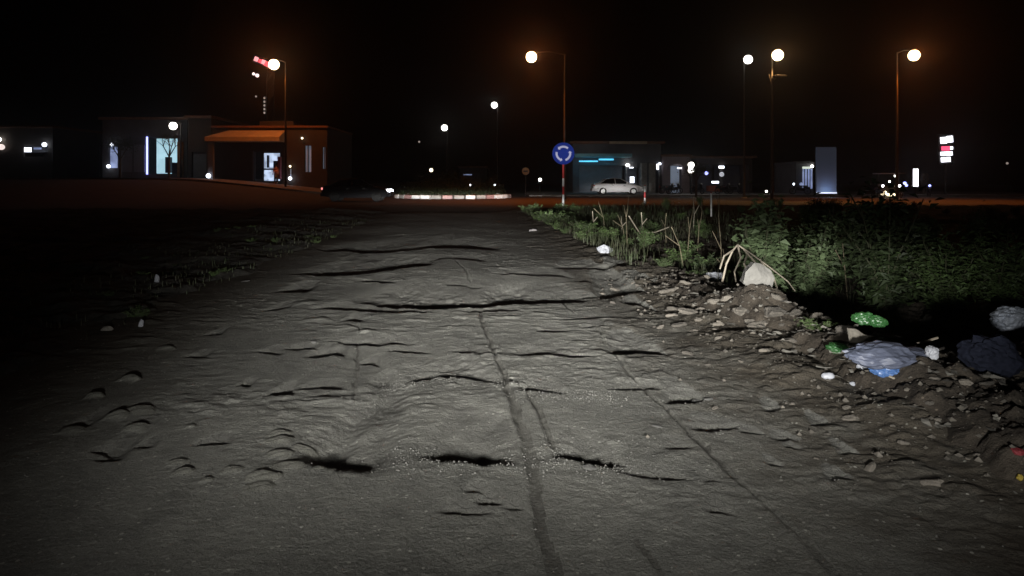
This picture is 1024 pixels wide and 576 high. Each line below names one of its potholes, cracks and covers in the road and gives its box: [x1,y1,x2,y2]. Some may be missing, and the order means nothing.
crack [616,463,735,515]
crack [96,434,164,462]
crack [633,539,665,576]
crack [194,432,235,446]
crack [738,396,860,481]
crack [235,250,658,576]
